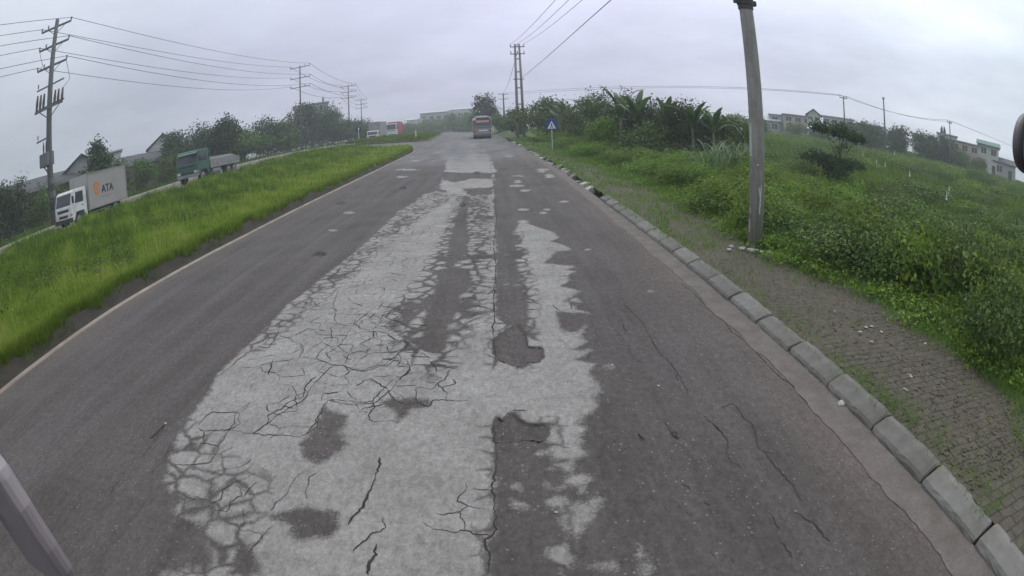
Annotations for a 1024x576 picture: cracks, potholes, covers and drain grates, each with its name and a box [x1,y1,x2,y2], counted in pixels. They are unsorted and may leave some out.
crack [622,305,688,394]
crack [348,457,386,575]
crack [665,423,710,516]
crack [196,473,316,552]
crack [704,403,830,558]
pothole [492,323,545,367]
crack [180,196,494,472]
pothole [491,412,550,443]
